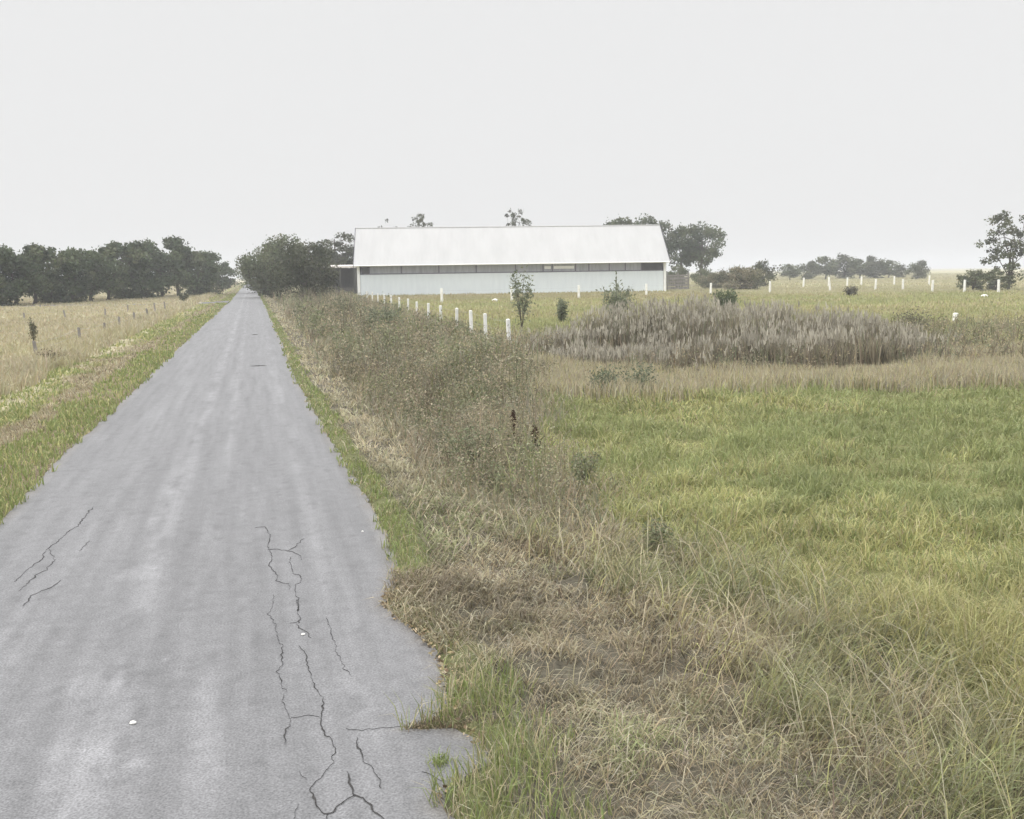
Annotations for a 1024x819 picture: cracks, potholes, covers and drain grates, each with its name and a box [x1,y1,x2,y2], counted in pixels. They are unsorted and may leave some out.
crack [14,507,93,604]
crack [255,527,410,819]
